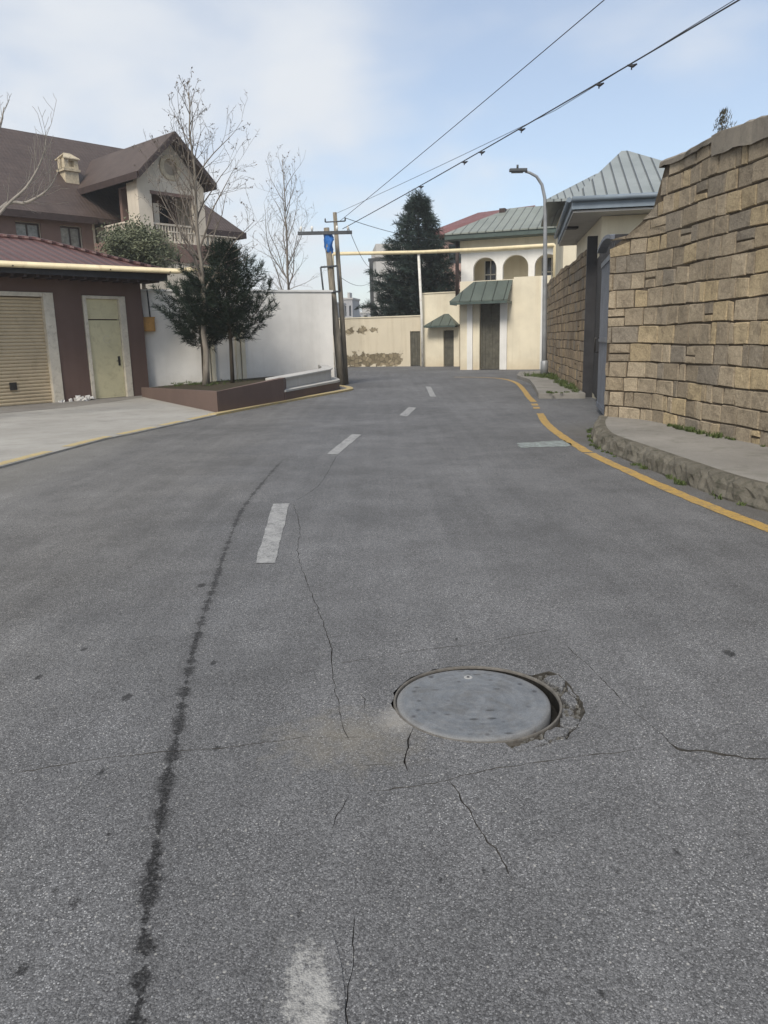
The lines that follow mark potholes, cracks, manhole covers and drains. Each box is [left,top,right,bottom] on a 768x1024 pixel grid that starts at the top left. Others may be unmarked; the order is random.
crack [345,919,355,1024]
crack [5,456,366,774]
crack [353,729,640,881]
manhole cover [393,666,562,747]
crack [567,646,768,760]
pothole [510,671,586,748]
